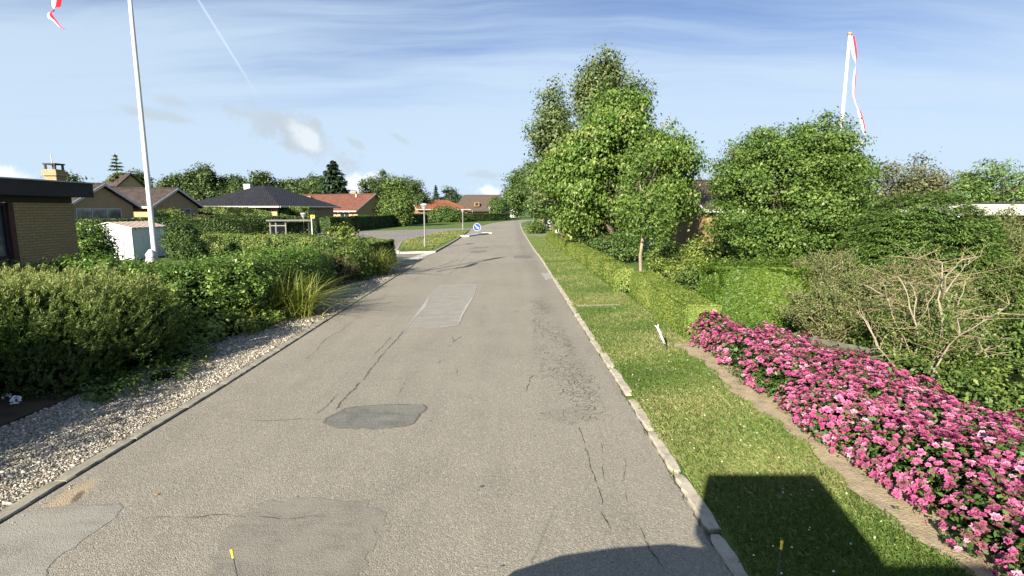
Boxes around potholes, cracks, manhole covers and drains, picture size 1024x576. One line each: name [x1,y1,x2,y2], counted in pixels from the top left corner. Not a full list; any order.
crack [261,331,403,421]
crack [526,298,607,423]
crack [579,428,664,568]
